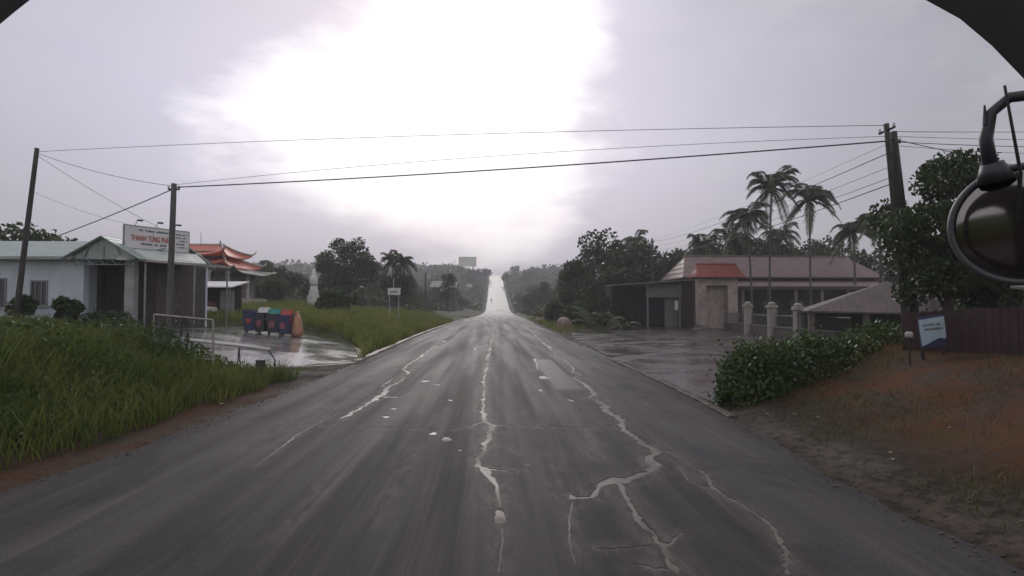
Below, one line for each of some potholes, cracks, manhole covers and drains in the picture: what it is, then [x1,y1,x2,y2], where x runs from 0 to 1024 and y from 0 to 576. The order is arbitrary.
crack [254,323,792,575]
